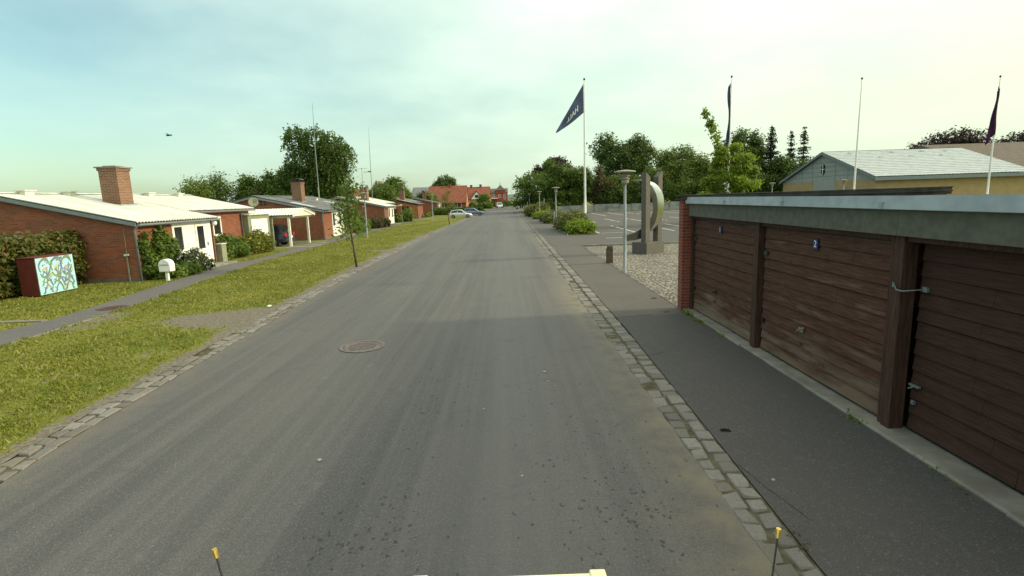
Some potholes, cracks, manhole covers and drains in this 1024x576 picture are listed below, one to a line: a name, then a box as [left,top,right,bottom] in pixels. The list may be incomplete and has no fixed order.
manhole cover [339,340,385,353]
